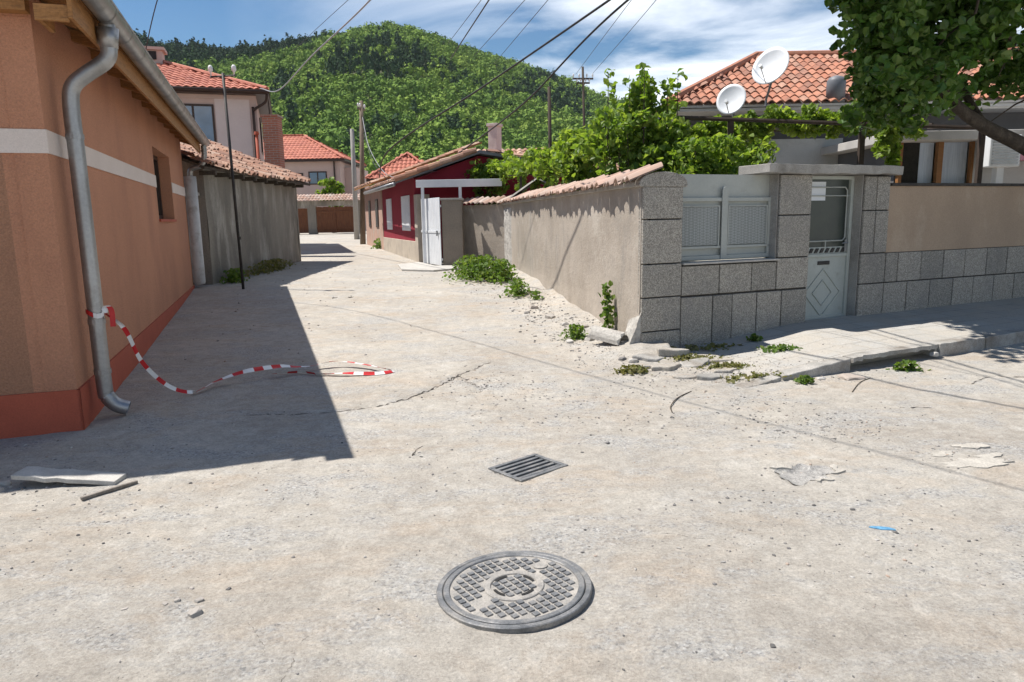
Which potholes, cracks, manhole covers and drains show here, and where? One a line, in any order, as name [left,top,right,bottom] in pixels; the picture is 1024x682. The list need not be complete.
manhole cover [436,551,592,634]
crack [263,363,492,415]
drain grate [488,453,568,482]
